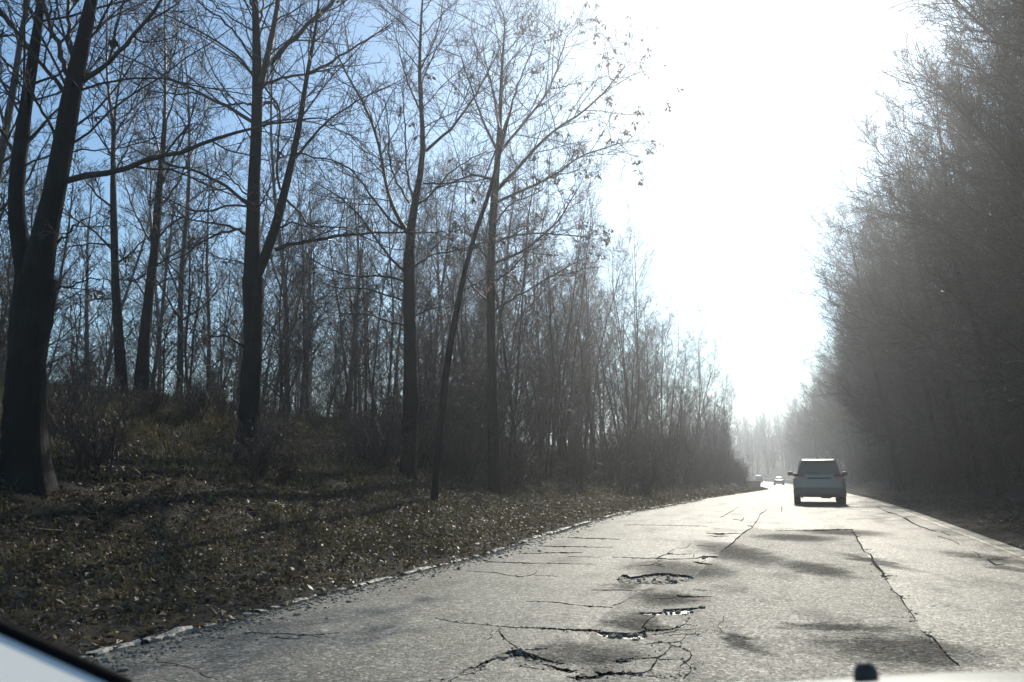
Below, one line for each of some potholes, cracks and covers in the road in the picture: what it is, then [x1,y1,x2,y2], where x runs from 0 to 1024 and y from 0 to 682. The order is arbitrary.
crack [877,507,949,535]
crack [473,507,744,577]
pothole [492,648,543,662]
pothole [639,605,706,616]
crack [246,628,335,640]
pothole [617,573,693,585]
crack [429,589,724,682]
pothole [596,630,647,641]
